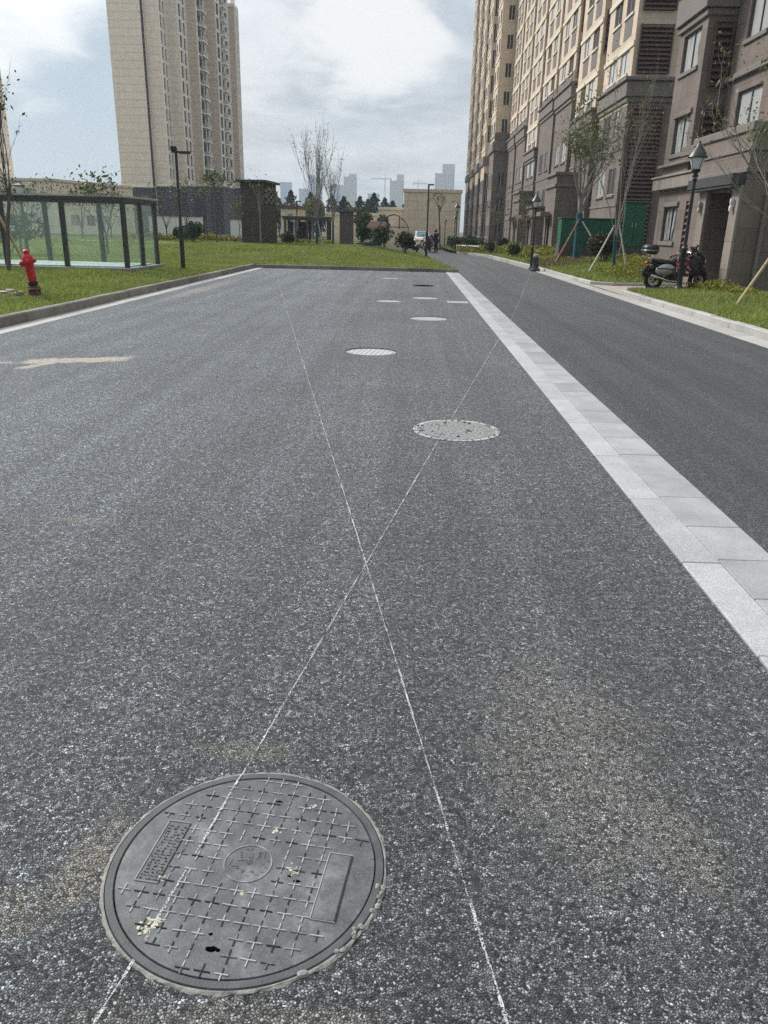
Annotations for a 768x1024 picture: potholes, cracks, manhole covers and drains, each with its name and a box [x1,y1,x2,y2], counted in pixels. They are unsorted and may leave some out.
manhole cover [99,772,388,997]
manhole cover [412,419,501,441]
